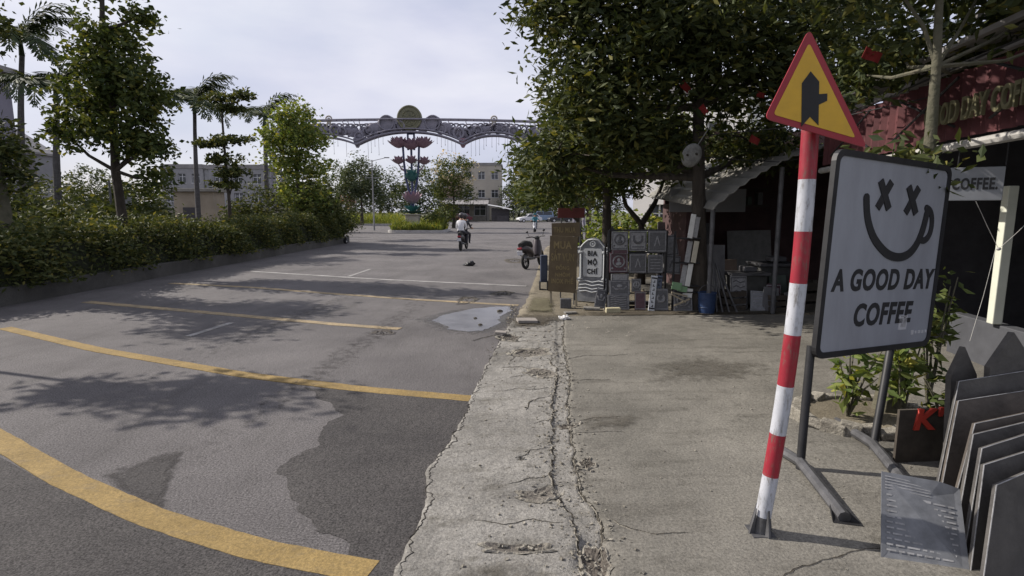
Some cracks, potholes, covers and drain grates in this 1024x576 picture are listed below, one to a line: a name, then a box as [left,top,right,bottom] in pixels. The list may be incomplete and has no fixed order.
crack [400,321,688,576]
crack [783,547,881,576]
